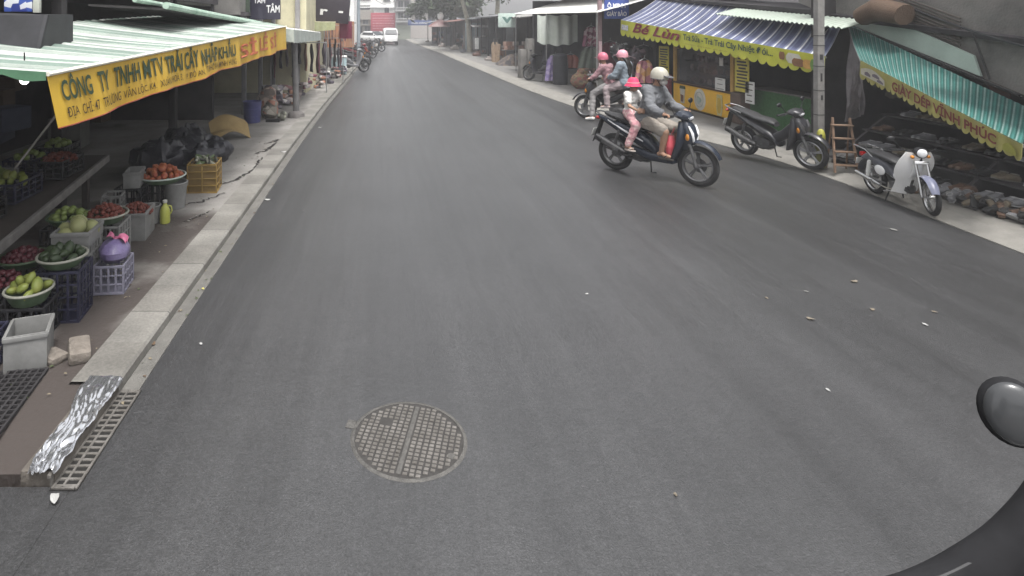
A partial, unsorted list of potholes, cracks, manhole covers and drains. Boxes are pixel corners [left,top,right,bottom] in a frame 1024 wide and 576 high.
drain grate [47,390,142,491]
manhole cover [345,402,467,483]
crack [182,139,278,223]
